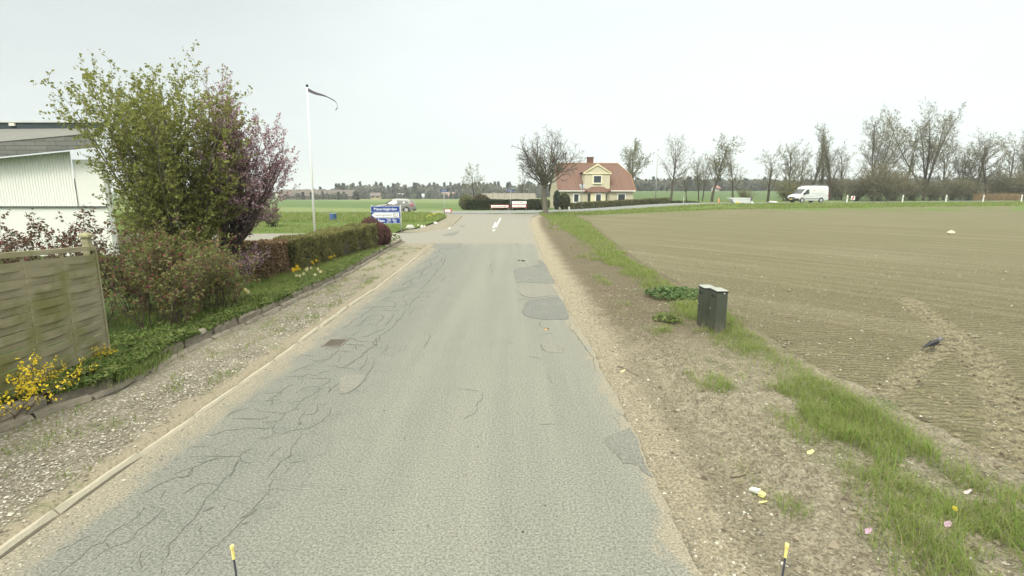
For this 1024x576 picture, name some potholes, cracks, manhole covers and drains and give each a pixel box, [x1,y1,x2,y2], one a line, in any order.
crack [535,318,596,370]
crack [57,249,449,575]
